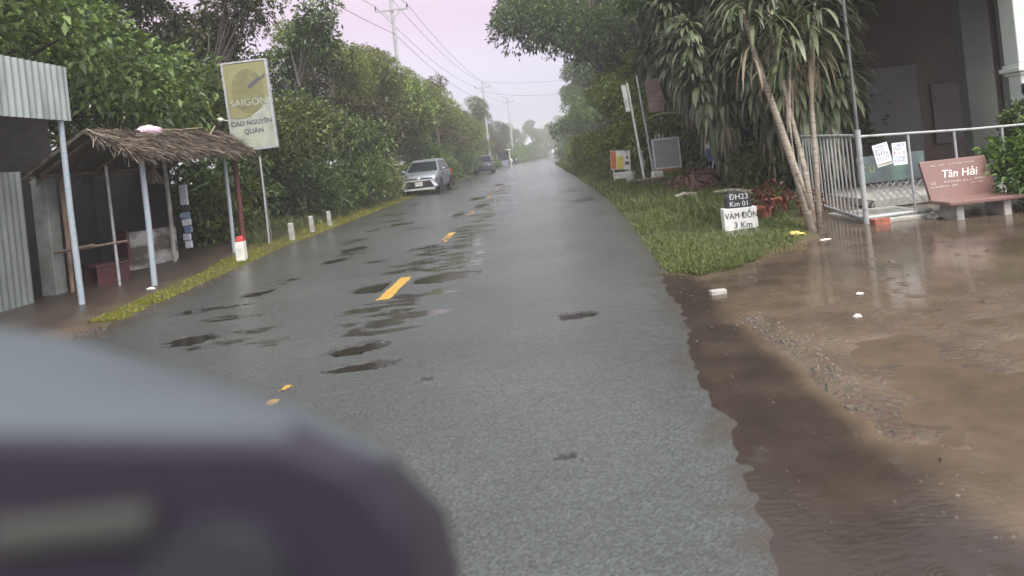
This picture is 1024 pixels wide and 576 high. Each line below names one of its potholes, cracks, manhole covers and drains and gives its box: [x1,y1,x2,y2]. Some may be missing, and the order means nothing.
pothole [319,358,403,374]
pothole [320,339,393,357]
pothole [553,452,577,461]
pothole [556,310,599,321]
pothole [157,332,223,349]
